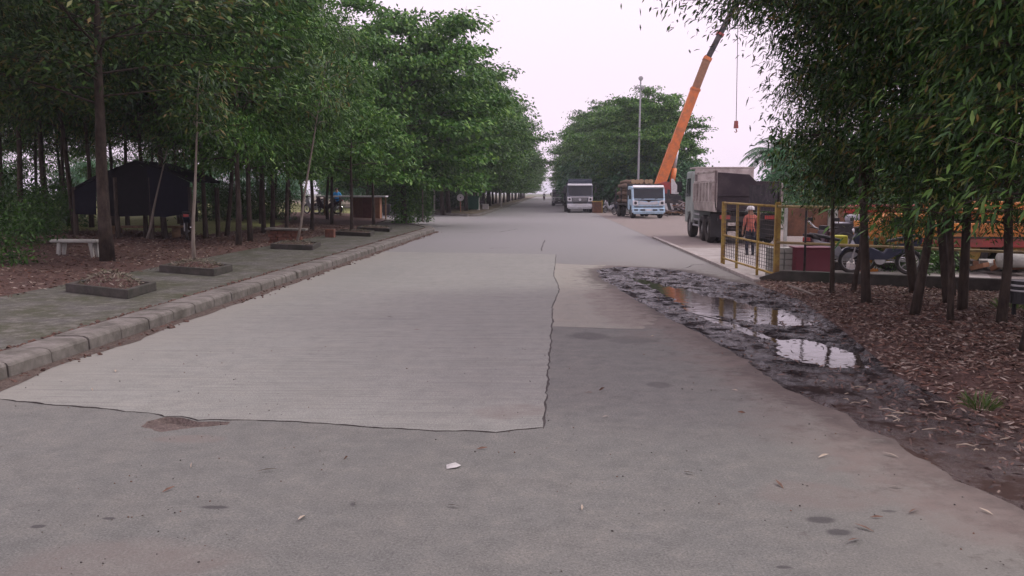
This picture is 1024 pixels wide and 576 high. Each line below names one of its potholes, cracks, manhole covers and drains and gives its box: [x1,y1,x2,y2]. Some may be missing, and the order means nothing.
pothole [141,417,230,432]
crack [2,240,613,433]
